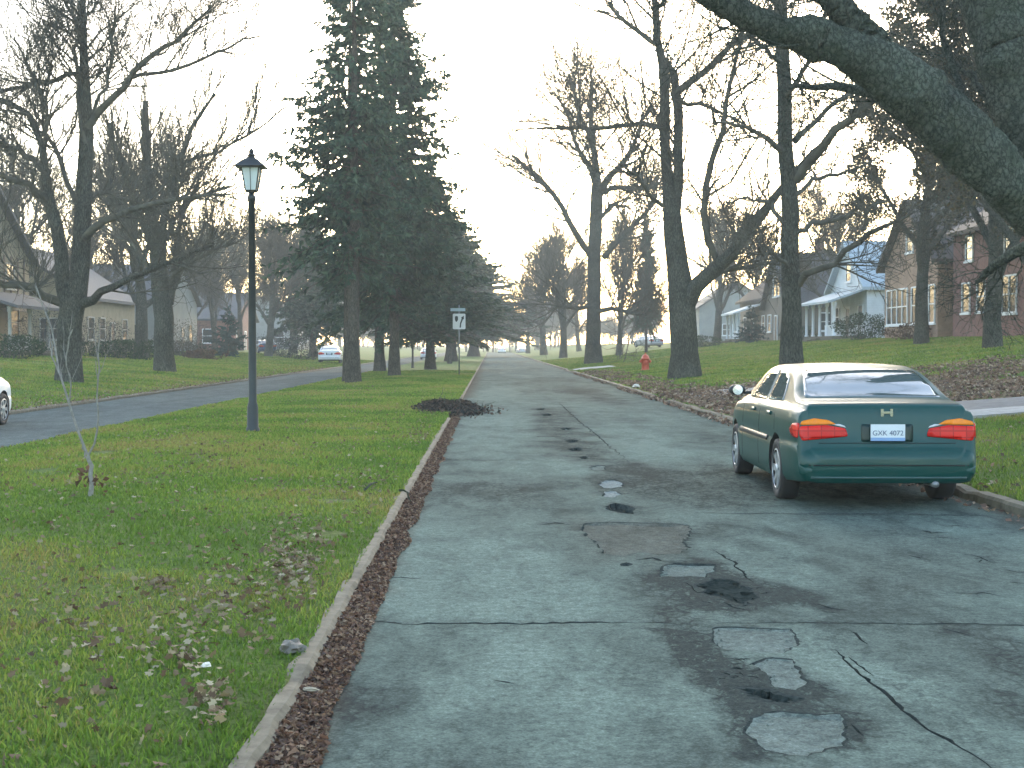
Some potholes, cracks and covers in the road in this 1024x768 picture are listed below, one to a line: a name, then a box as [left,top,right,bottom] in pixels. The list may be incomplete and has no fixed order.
pothole [736,686,805,704]
crack [686,550,768,611]
pothole [694,578,760,604]
crack [837,628,991,768]
pothole [605,503,635,514]
